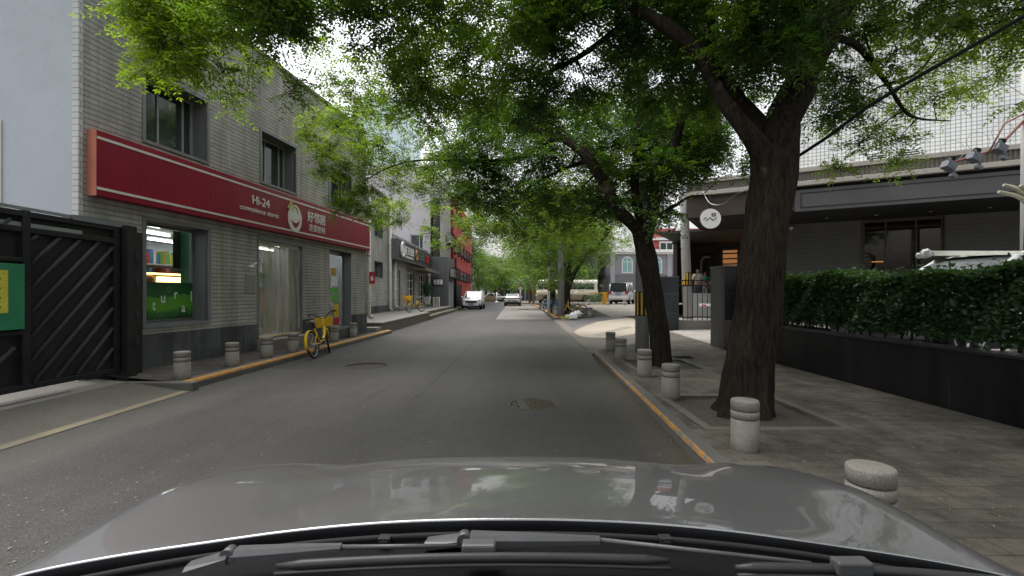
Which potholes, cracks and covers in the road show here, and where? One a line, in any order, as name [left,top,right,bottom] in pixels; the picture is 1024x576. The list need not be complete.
manhole cover [508,398,559,410]
